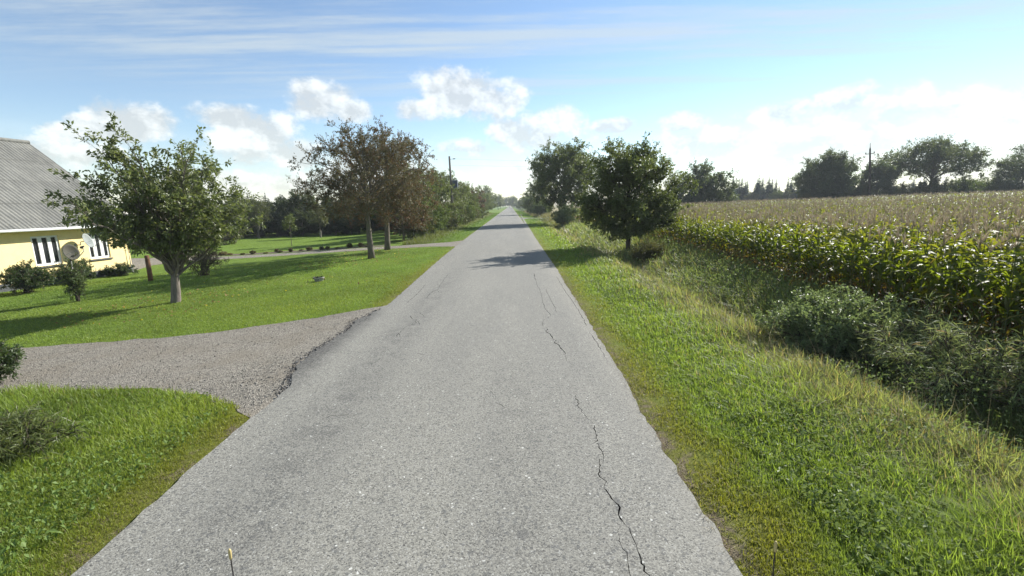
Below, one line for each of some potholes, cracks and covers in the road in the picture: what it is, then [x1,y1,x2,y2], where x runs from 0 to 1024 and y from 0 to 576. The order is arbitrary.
crack [534,274,604,360]
crack [575,395,650,576]
